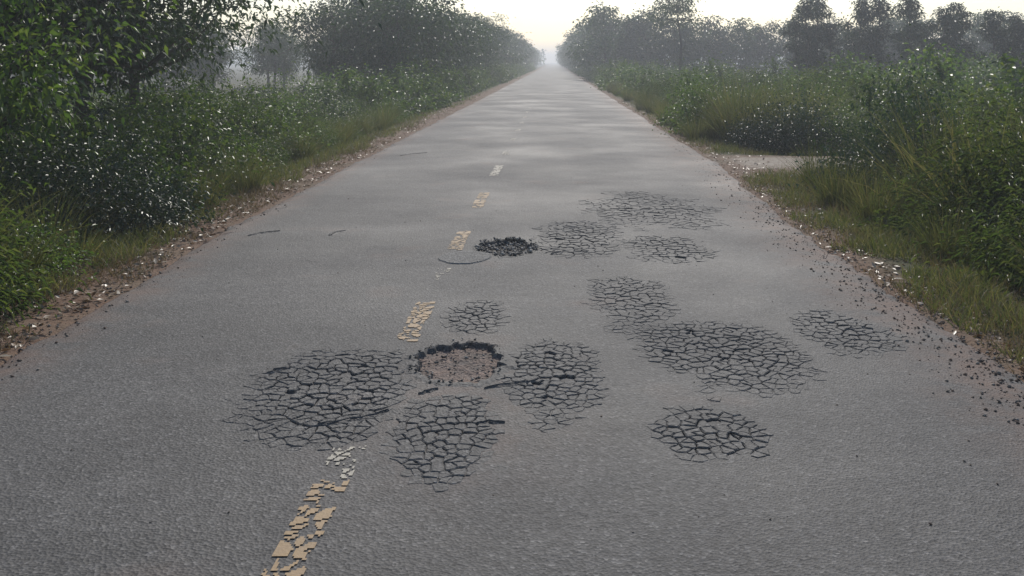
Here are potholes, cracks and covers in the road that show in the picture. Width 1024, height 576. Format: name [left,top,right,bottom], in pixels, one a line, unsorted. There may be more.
crack [220,191,910,493]
pothole [472,236,542,259]
pothole [403,338,520,388]
